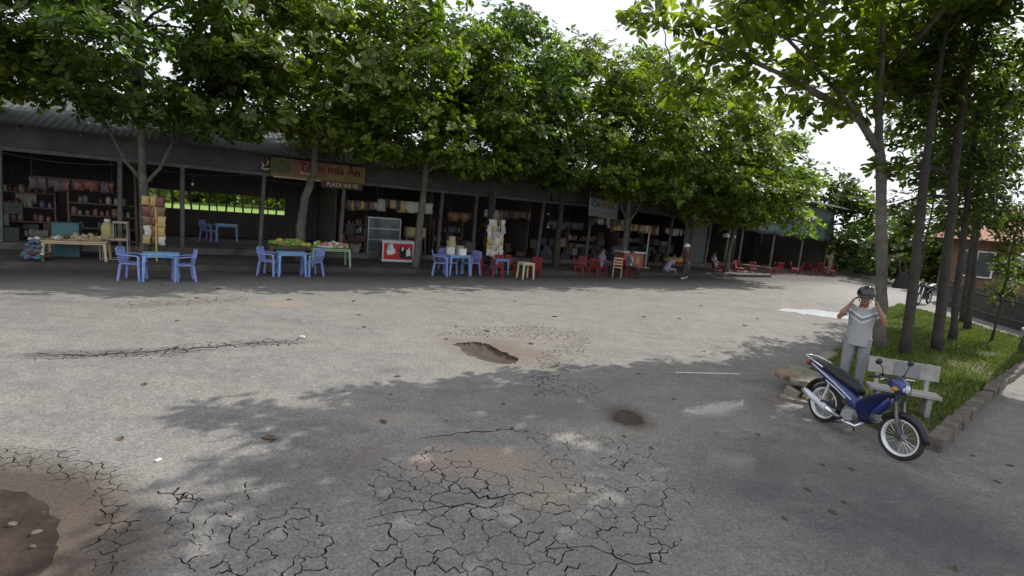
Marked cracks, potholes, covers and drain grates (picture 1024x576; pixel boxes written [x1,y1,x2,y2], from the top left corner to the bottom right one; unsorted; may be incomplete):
crack [437,325,605,399]
pothole [0,489,61,576]
crack [9,336,299,361]
crack [0,446,343,576]
pothole [612,410,645,425]
pothole [451,342,519,364]
crack [366,429,696,576]
